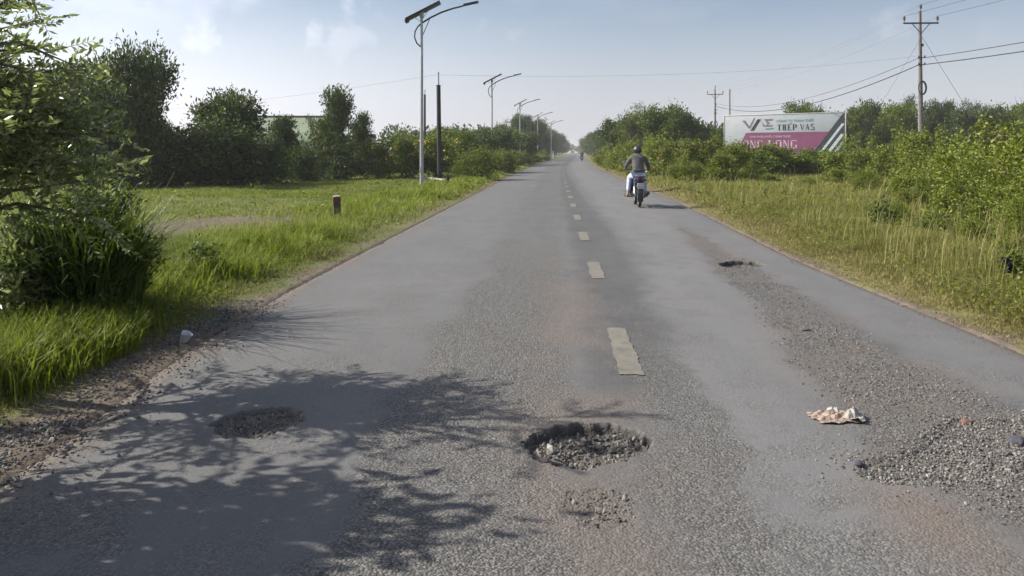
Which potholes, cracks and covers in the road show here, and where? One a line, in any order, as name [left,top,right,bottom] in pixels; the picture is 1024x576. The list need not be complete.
pothole [200,404,316,442]
pothole [554,482,654,541]
pothole [714,260,773,269]
pothole [511,419,663,475]
